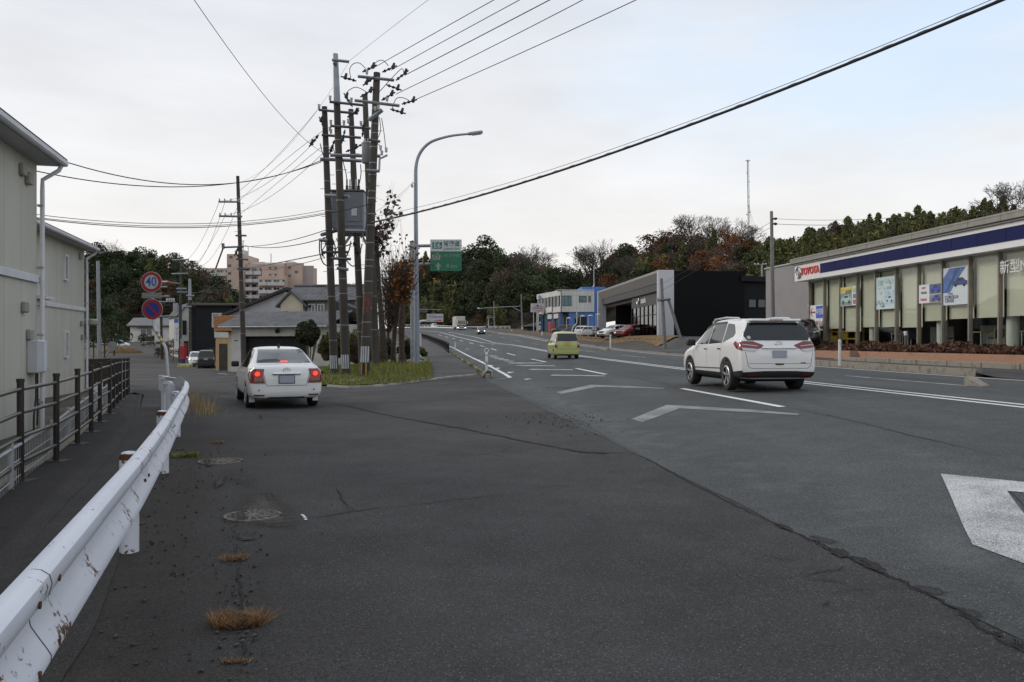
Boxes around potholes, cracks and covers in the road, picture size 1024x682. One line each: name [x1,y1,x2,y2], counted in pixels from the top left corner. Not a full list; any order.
crack [319,488,390,517]
manhole cover [223,509,282,522]
crack [326,402,634,458]
crack [235,544,244,613]
